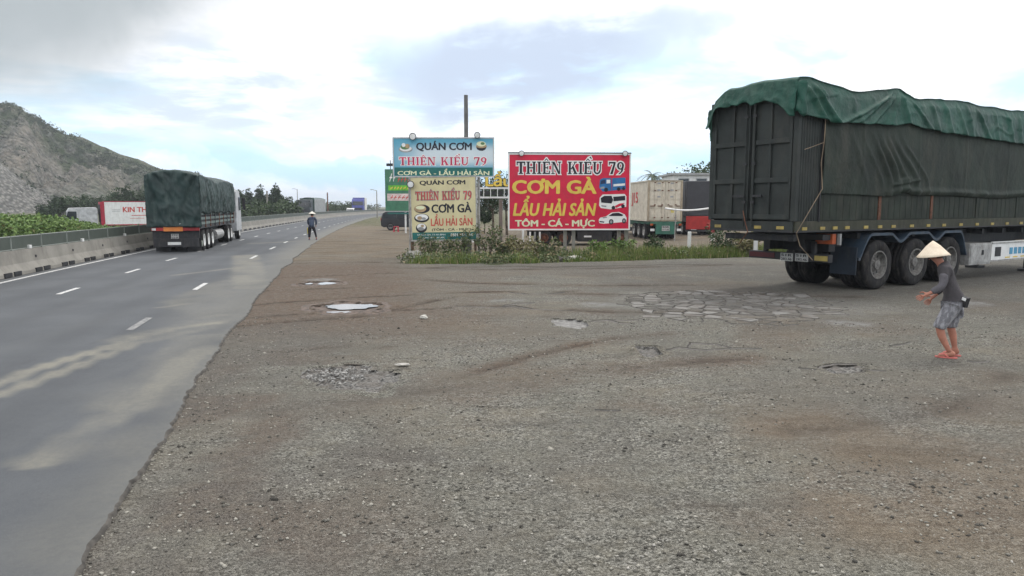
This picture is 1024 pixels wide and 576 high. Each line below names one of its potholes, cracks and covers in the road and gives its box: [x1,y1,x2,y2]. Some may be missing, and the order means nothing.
pothole [301,300,392,316]
pothole [288,360,413,398]
pothole [807,361,876,376]
crack [590,290,849,351]
pothole [546,317,597,331]
